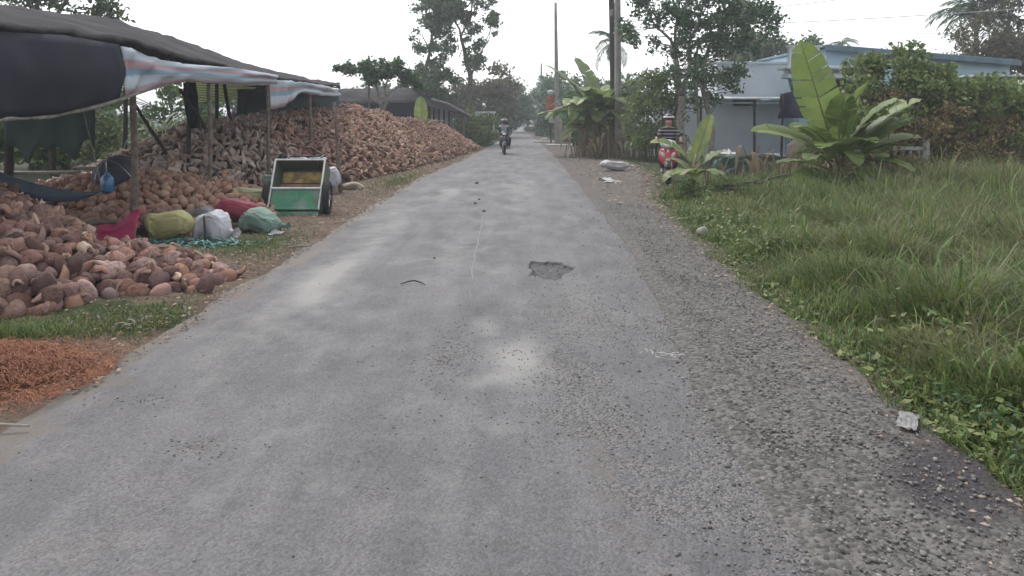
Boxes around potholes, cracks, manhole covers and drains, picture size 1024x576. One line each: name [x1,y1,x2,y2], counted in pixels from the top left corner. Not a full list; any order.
pothole [528,261,575,279]
crack [467,217,483,308]
